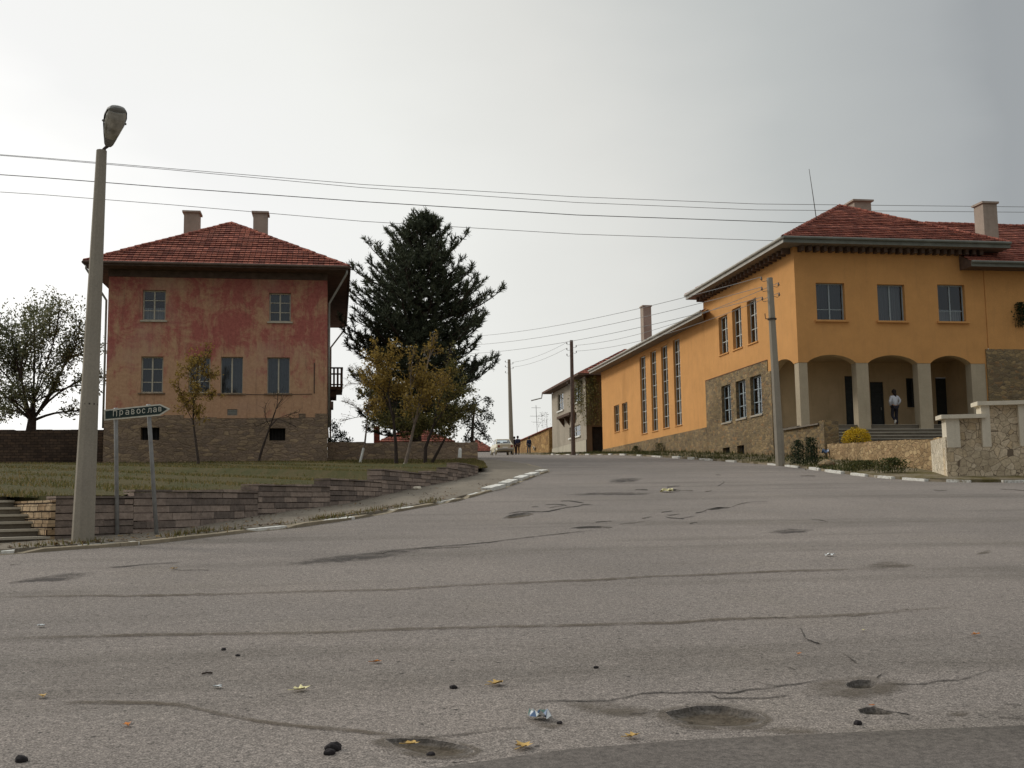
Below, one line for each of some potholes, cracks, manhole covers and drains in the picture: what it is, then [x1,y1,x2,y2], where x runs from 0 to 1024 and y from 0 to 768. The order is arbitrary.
pothole [648,702,784,732]
crack [560,667,801,701]
crack [383,533,565,553]
pothole [367,734,493,763]
